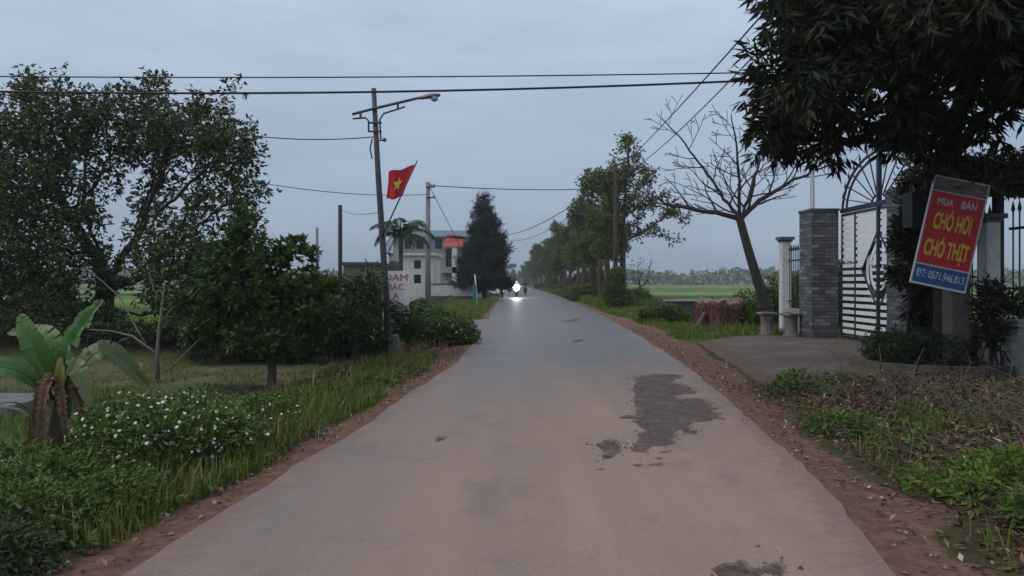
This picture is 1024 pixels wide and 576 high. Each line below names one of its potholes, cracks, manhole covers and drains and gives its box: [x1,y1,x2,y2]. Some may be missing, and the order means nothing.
pothole [596,439,623,461]
pothole [711,559,787,576]
pothole [618,373,726,454]
